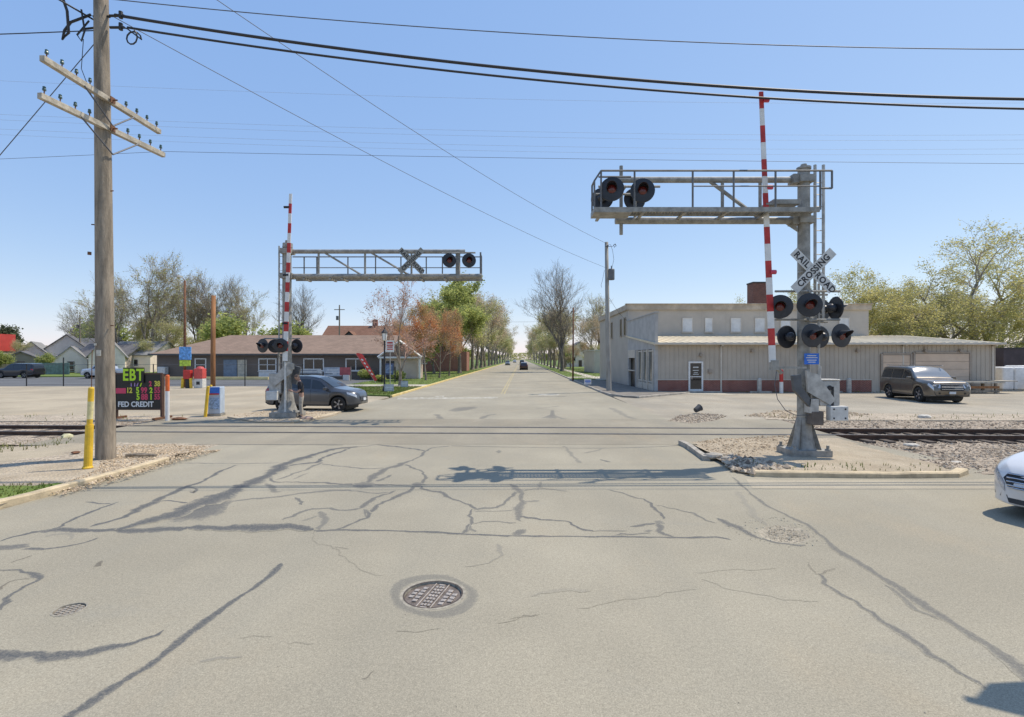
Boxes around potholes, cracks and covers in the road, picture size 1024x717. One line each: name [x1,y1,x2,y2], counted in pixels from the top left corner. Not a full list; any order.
crack [290,448,379,469]
manhole cover [389,574,480,619]
crack [461,481,836,574]
crack [562,446,606,463]
pothole [758,525,811,543]
